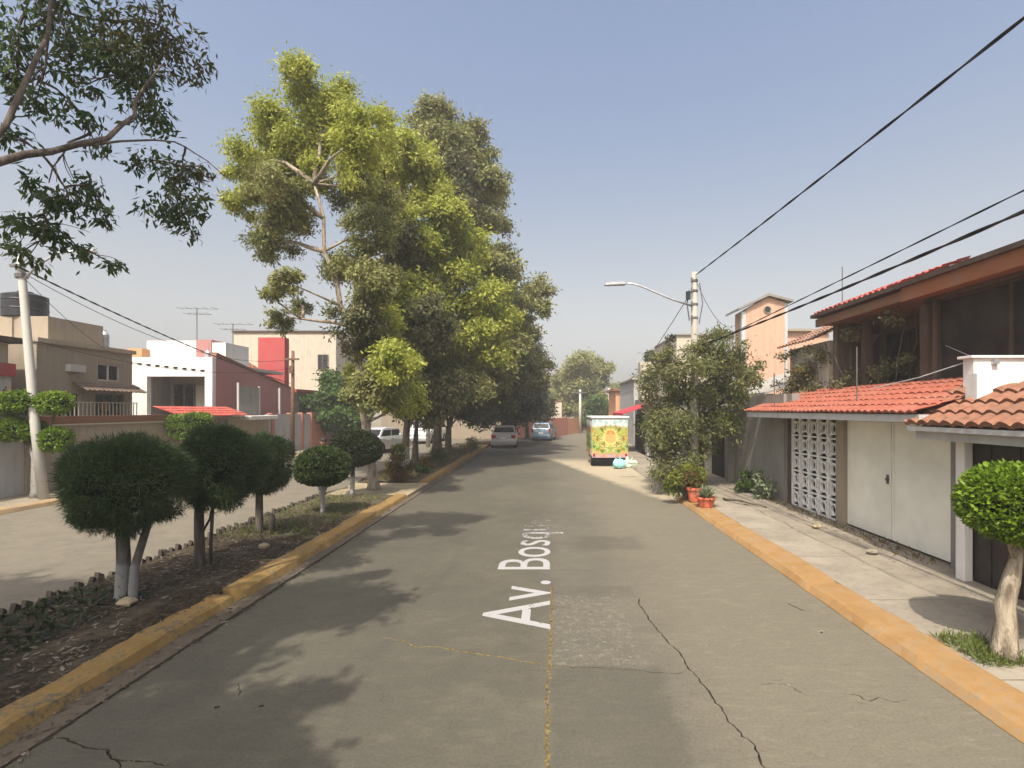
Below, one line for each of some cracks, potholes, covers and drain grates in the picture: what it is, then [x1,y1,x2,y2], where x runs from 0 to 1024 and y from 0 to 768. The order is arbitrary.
crack [566,598,762,766]
crack [391,638,547,665]
crack [55,737,166,768]
